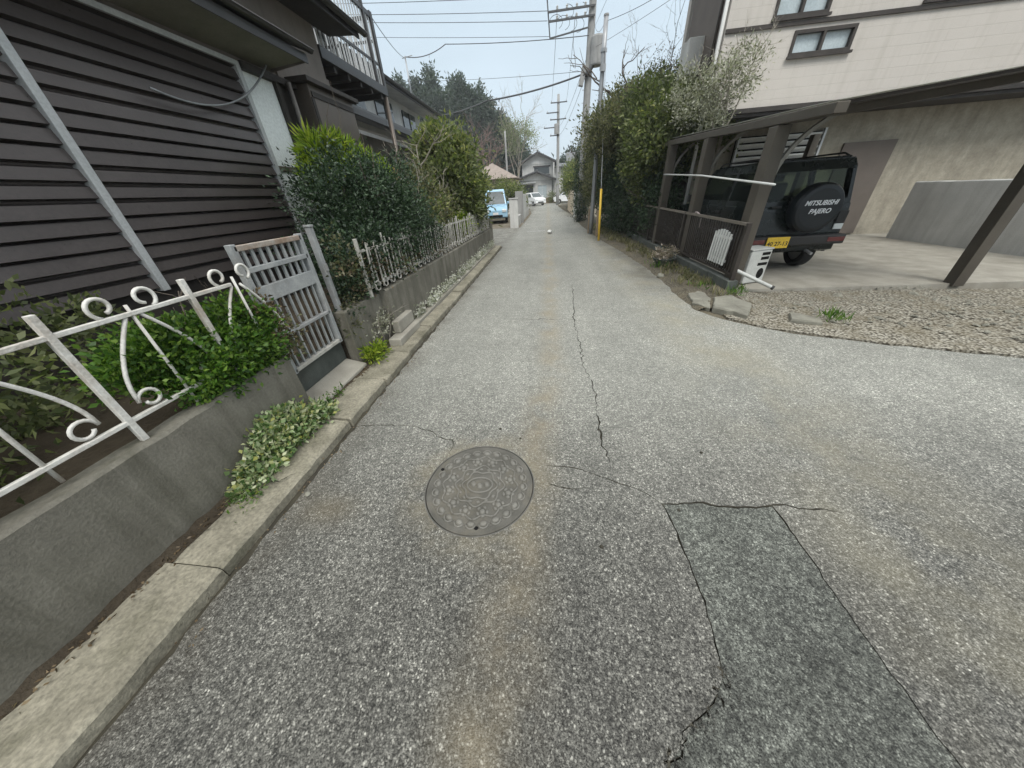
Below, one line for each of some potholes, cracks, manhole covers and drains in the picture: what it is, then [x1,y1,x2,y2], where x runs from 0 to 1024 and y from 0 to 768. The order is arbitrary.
manhole cover [424,446,535,538]
crack [529,288,841,768]
